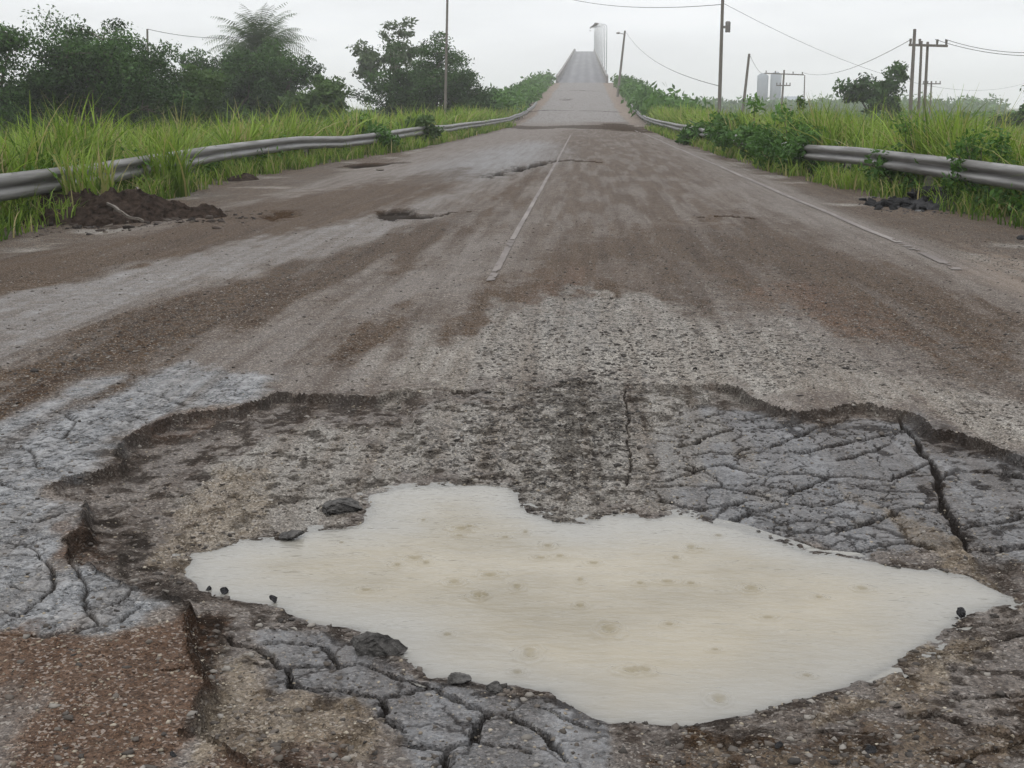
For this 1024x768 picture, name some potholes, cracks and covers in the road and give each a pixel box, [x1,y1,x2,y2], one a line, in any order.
pothole [375,207,438,222]
crack [0,509,141,639]
crack [222,635,592,768]
crack [623,387,1024,553]
pothole [47,381,1024,768]
crack [0,389,198,491]
pothole [338,161,410,169]
